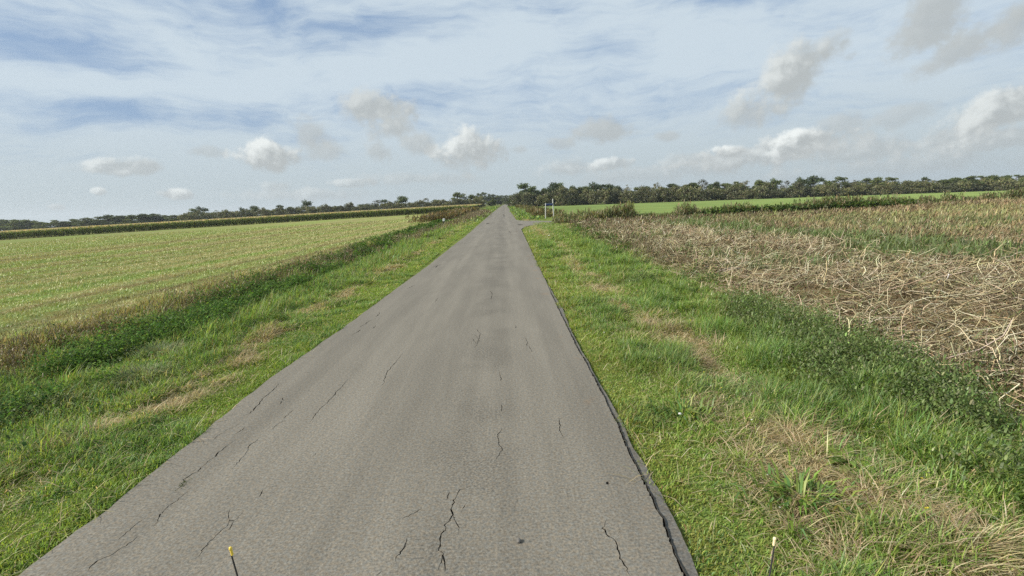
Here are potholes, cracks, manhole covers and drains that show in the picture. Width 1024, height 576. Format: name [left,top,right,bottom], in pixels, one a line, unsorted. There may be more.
crack [438,488,466,570]
crack [551,294,687,576]
crack [158,427,263,519]
